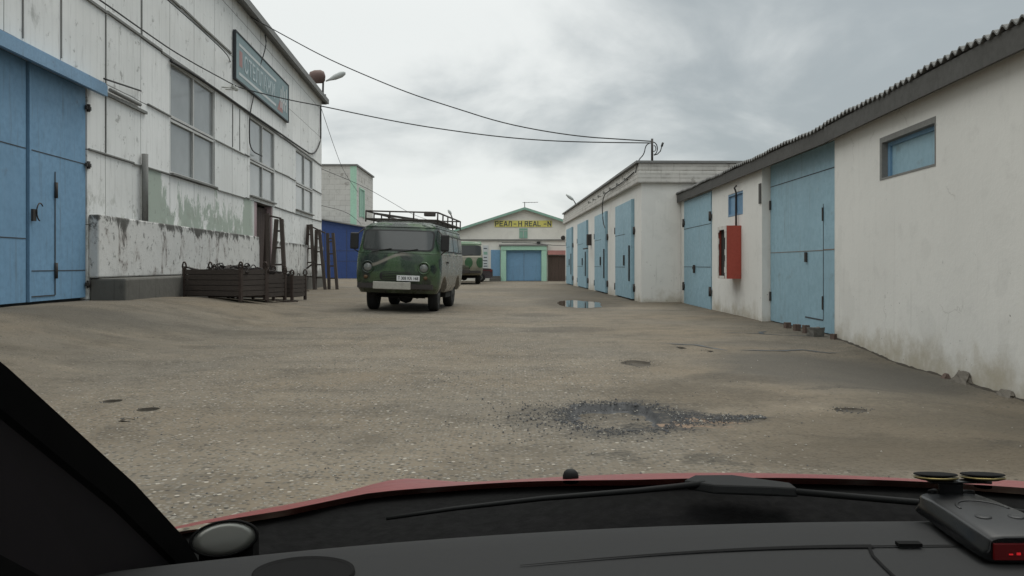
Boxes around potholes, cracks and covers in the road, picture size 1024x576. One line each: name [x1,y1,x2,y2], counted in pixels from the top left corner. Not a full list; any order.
pothole [64,395,159,410]
pothole [466,398,767,445]
pothole [97,402,198,421]
crack [758,331,838,353]
